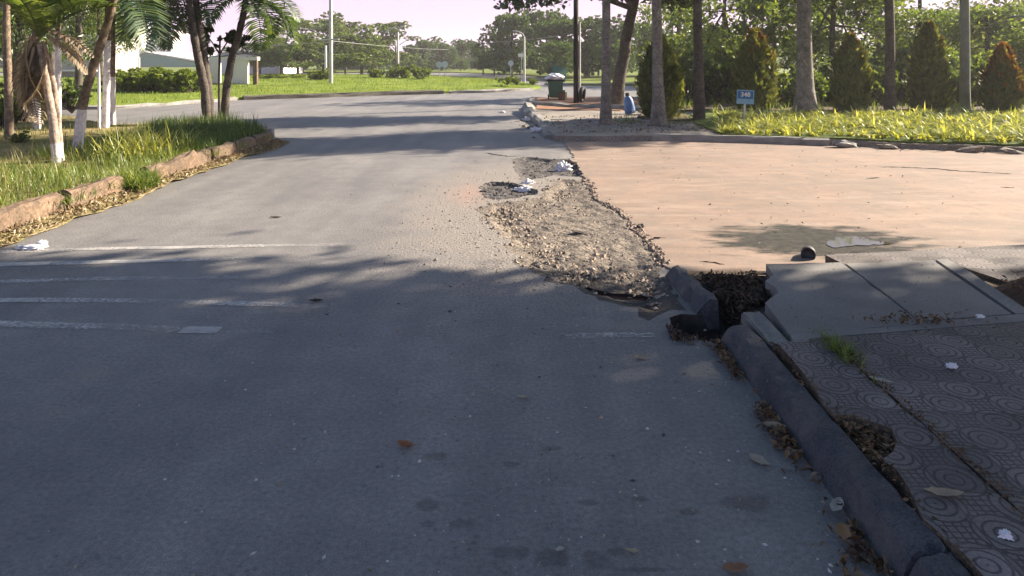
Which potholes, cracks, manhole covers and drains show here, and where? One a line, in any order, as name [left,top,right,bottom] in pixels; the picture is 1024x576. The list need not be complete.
pothole [474,179,686,321]
pothole [512,157,582,181]
crack [901,167,1014,188]
